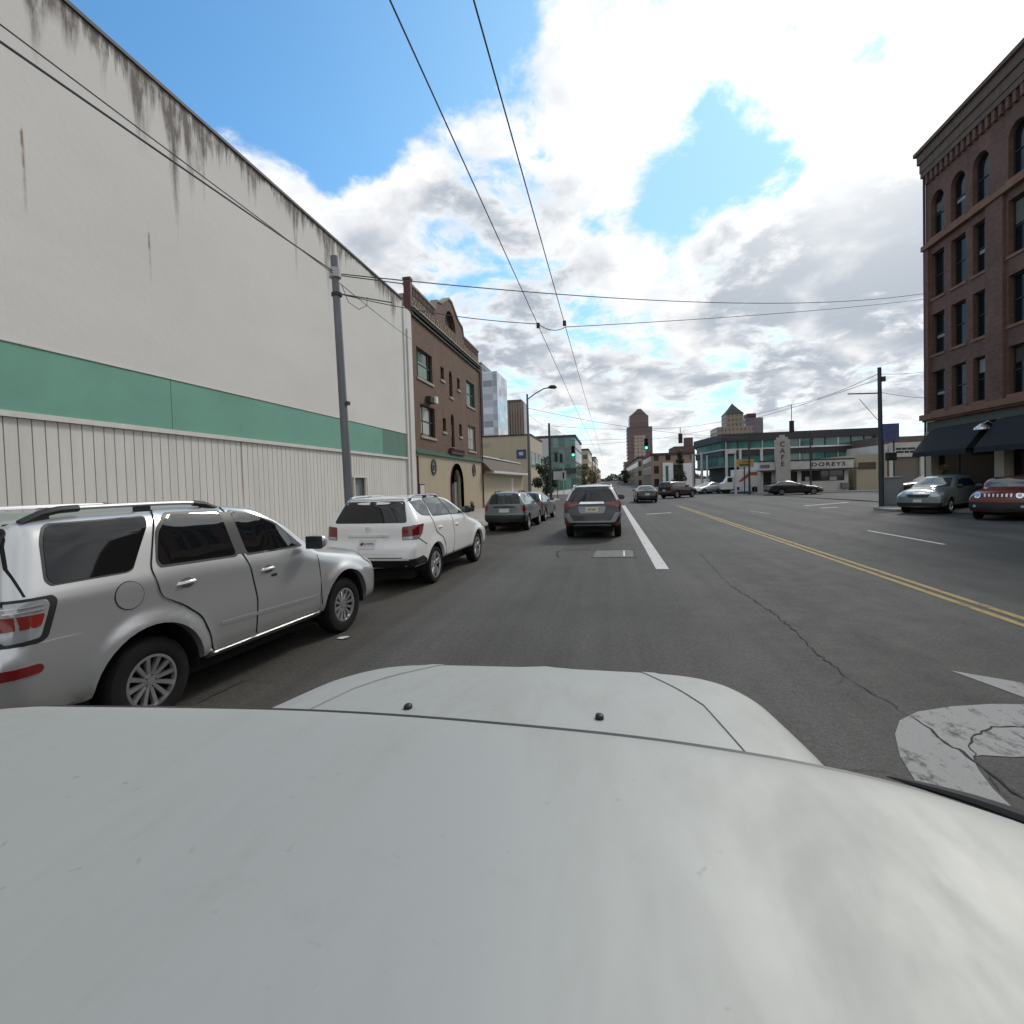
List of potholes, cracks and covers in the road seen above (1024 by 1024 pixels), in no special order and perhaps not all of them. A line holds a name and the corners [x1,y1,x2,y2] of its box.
crack [700,553,1024,798]
manhole cover [591,550,637,558]
